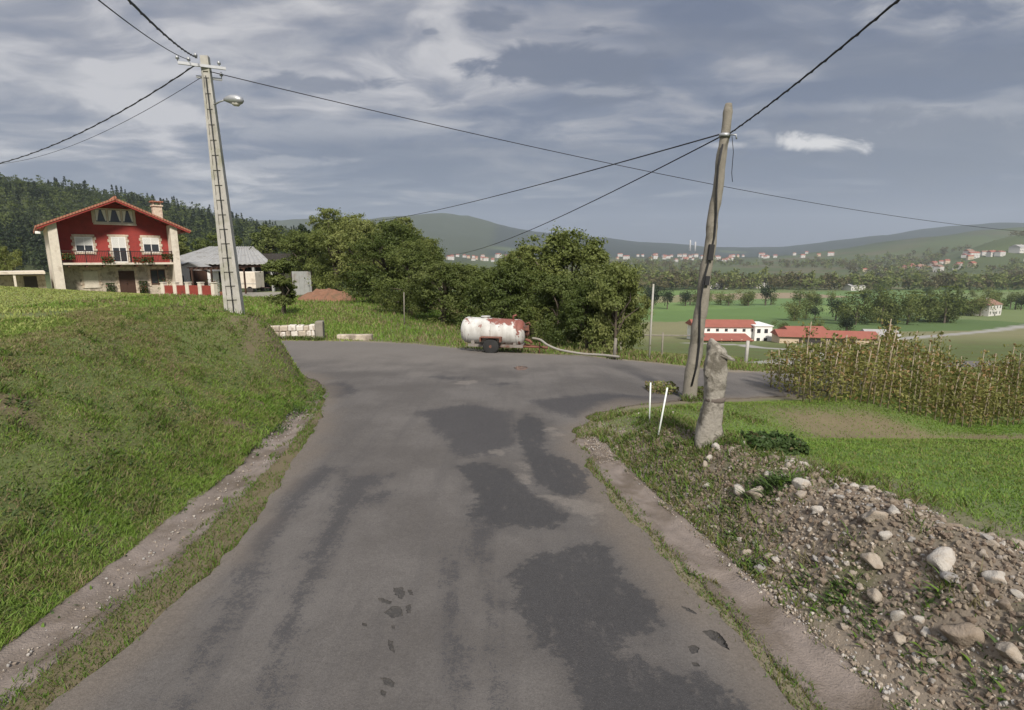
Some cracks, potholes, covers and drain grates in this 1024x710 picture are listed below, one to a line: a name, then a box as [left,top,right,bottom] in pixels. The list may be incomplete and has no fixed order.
pothole [702,630,729,650]
pothole [378,587,413,618]
